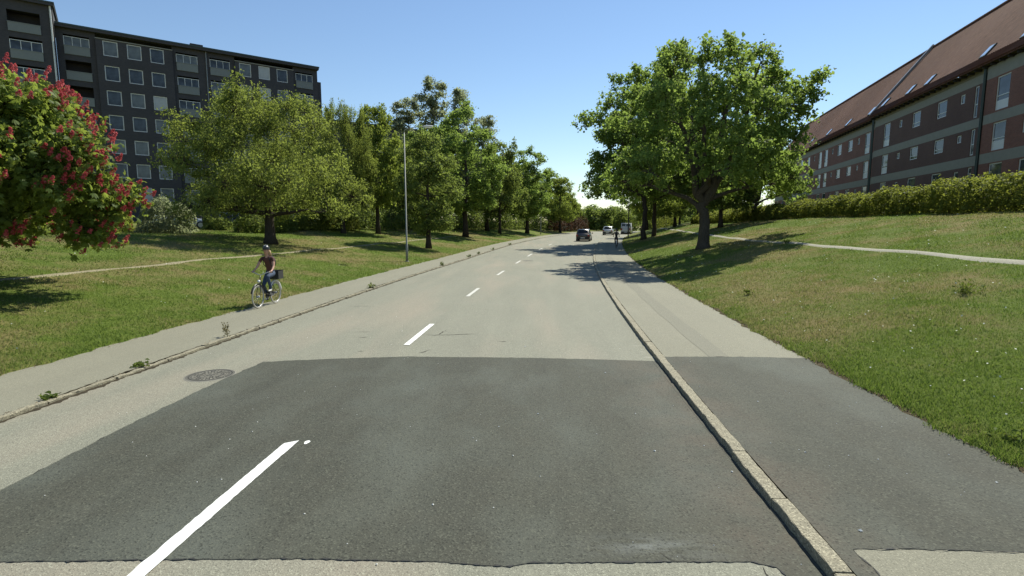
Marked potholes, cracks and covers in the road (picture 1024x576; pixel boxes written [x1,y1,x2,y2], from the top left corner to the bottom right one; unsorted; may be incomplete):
manhole cover [183,369,237,382]
